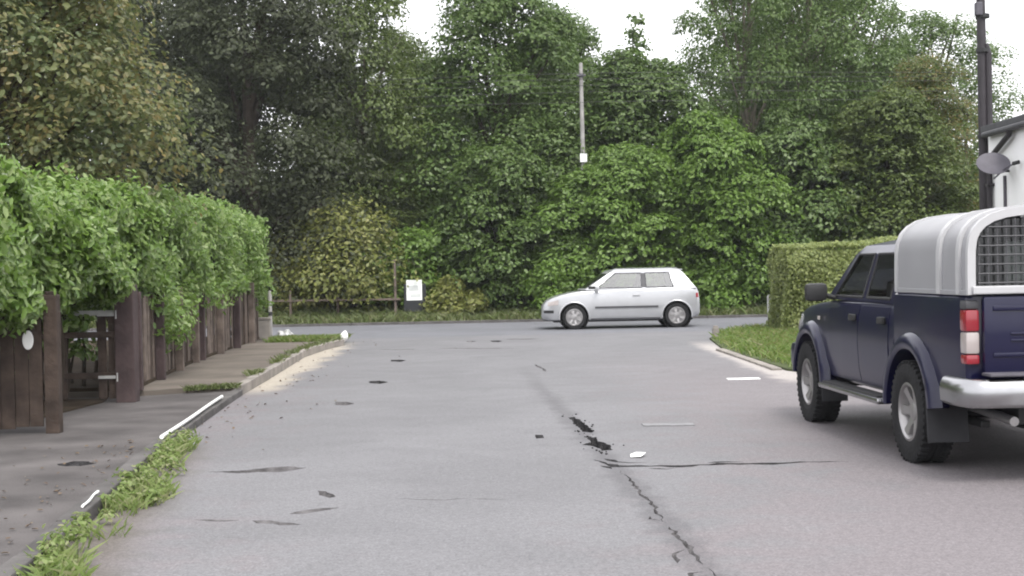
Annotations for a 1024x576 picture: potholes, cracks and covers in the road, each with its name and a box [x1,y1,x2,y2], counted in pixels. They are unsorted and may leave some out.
crack [595,459,842,576]
pothole [562,414,594,433]
pothole [580,433,625,455]
